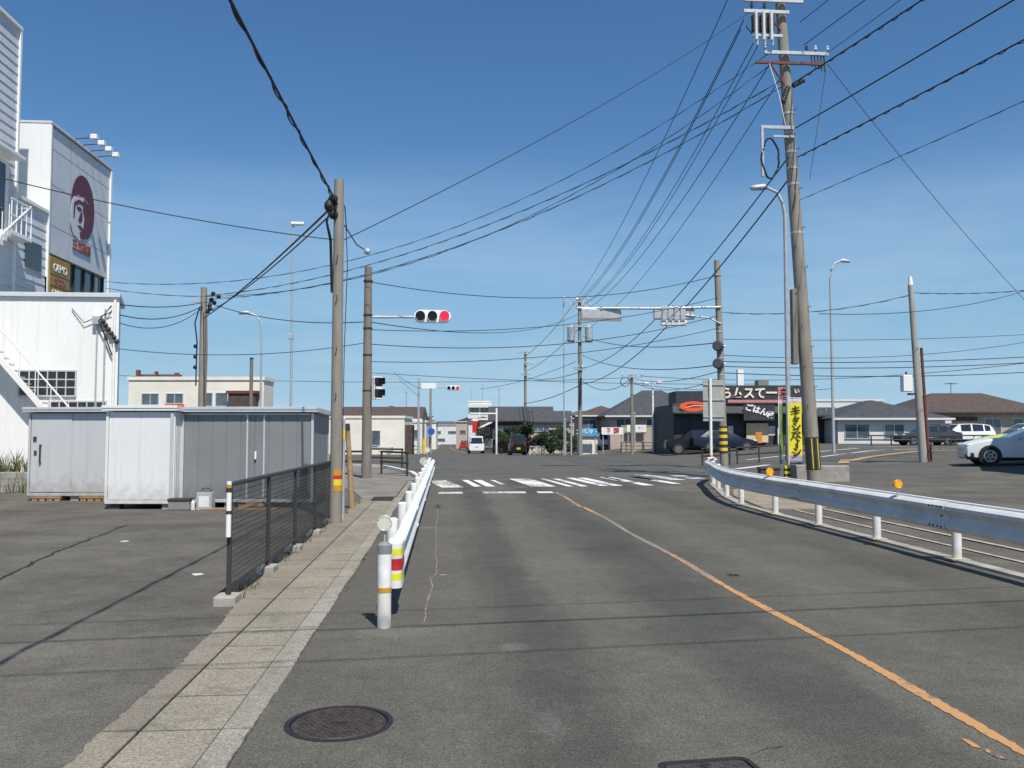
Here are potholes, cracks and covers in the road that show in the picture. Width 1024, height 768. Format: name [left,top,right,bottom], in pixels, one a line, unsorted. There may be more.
manhole cover [283,705,393,742]
manhole cover [658,756,760,768]
crack [423,508,448,622]
